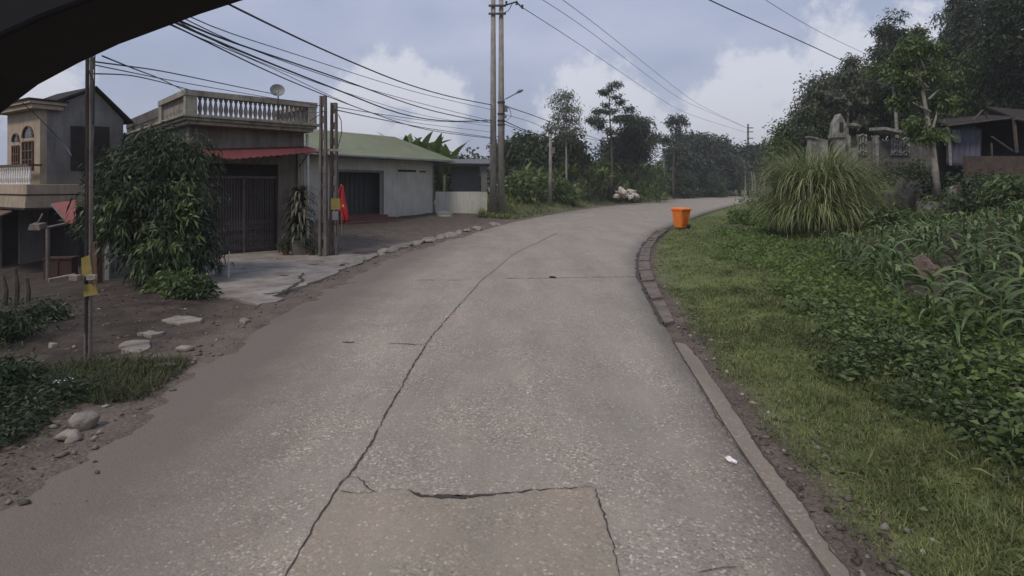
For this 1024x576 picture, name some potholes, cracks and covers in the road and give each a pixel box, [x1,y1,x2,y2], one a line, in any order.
crack [285,233,620,576]
crack [263,264,318,296]
